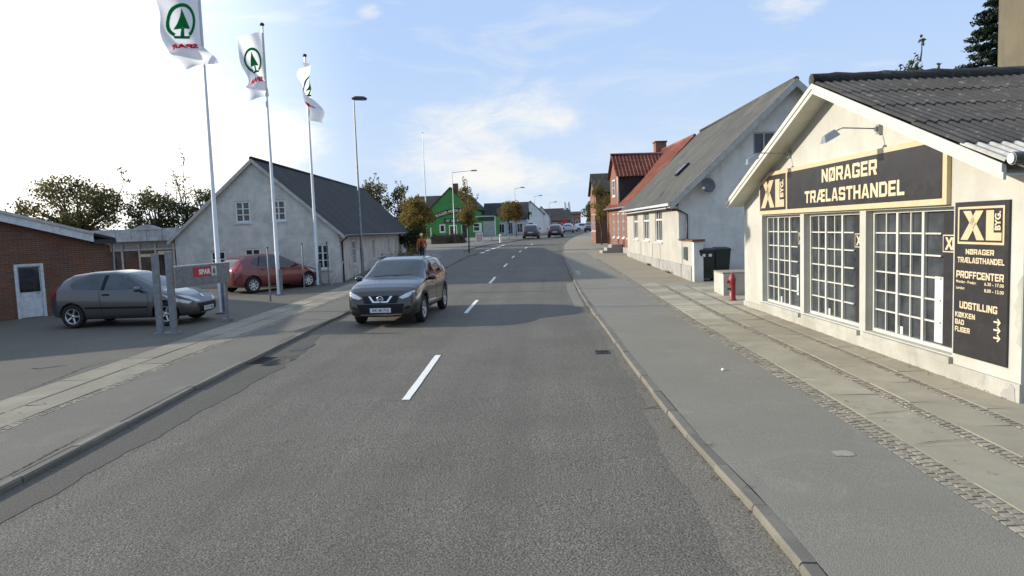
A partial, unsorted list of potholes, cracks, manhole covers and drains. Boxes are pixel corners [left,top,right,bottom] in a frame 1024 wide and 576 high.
pothole [262,357,298,366]
